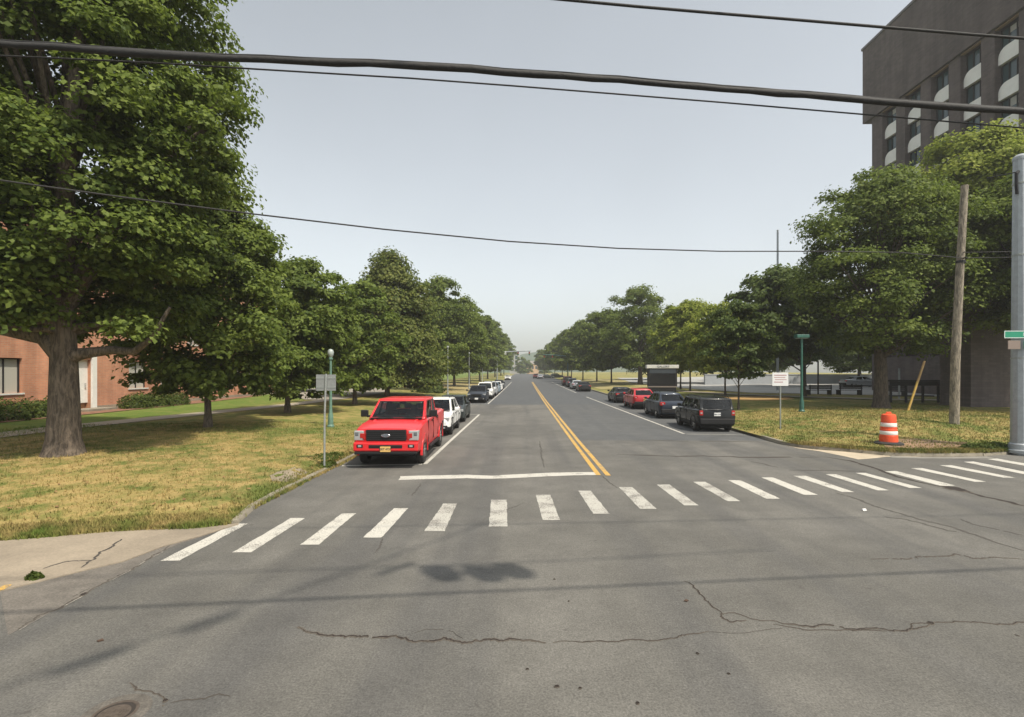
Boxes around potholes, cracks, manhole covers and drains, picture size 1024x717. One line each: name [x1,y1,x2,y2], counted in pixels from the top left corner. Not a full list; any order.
crack [297,581,1024,644]
crack [130,682,230,706]
manhole cover [80,694,153,717]
crack [888,517,1020,535]
crack [82,539,122,567]
